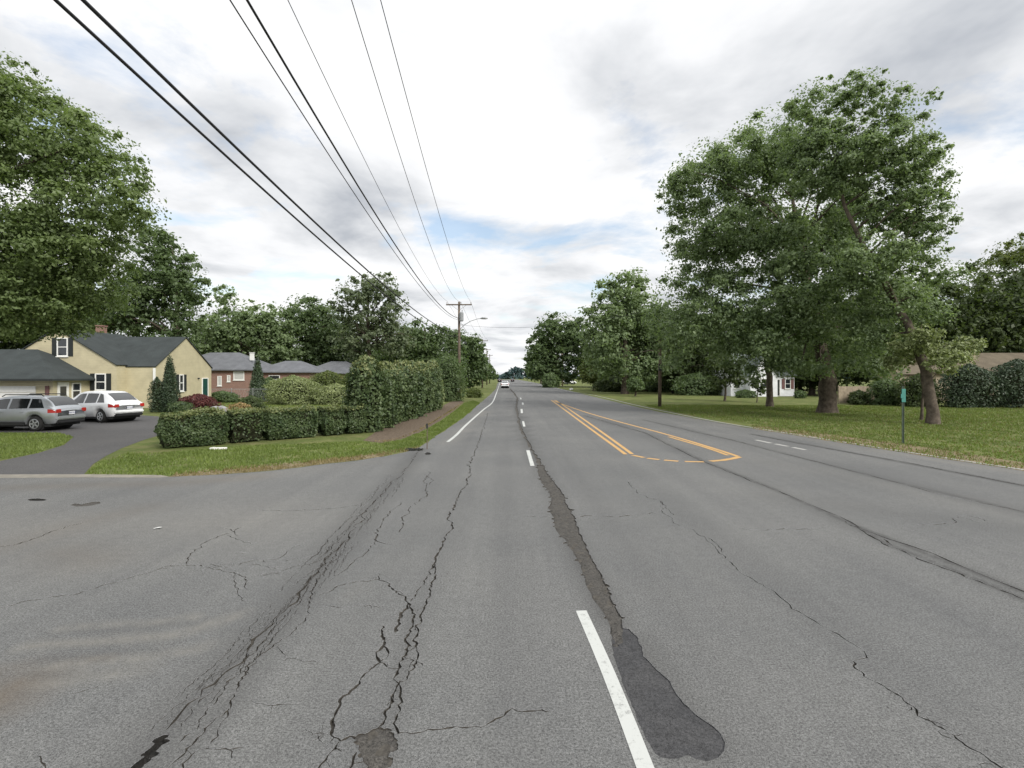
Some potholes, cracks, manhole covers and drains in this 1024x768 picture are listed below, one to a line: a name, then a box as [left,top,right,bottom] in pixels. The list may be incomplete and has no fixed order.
crack [1,527,299,609]
pothole [353,727,398,768]
crack [305,415,554,768]
crack [581,482,1003,768]
